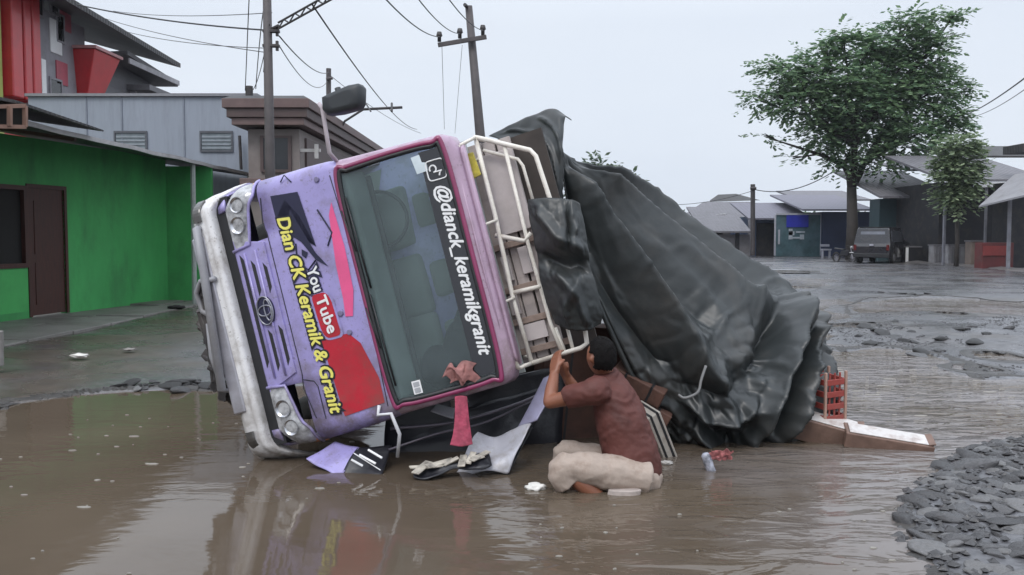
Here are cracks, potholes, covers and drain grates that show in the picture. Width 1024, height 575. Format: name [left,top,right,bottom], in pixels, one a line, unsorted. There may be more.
pothole [0,344,1024,575]
